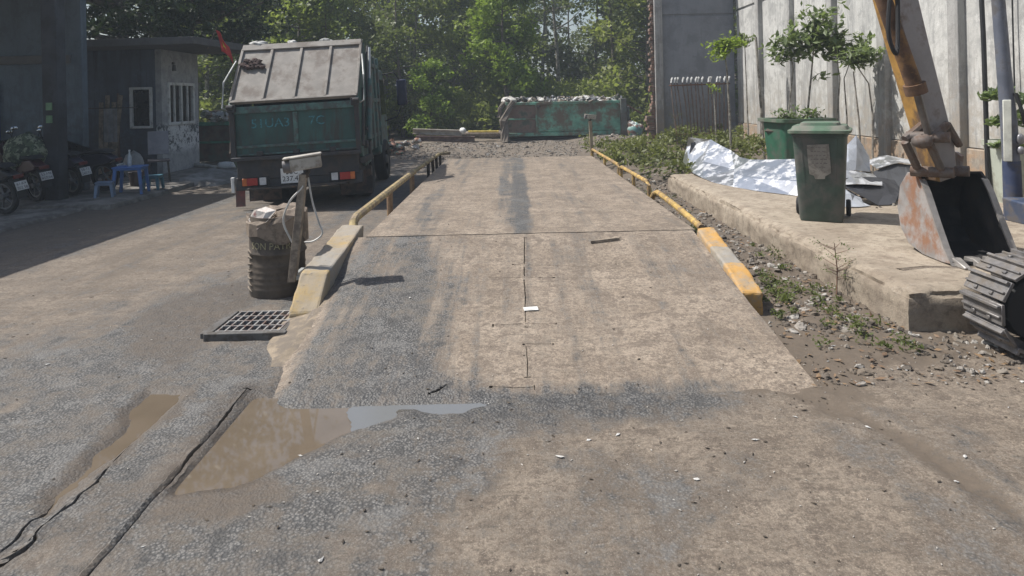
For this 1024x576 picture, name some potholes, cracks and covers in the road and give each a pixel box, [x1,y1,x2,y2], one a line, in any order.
crack [0,389,251,576]
